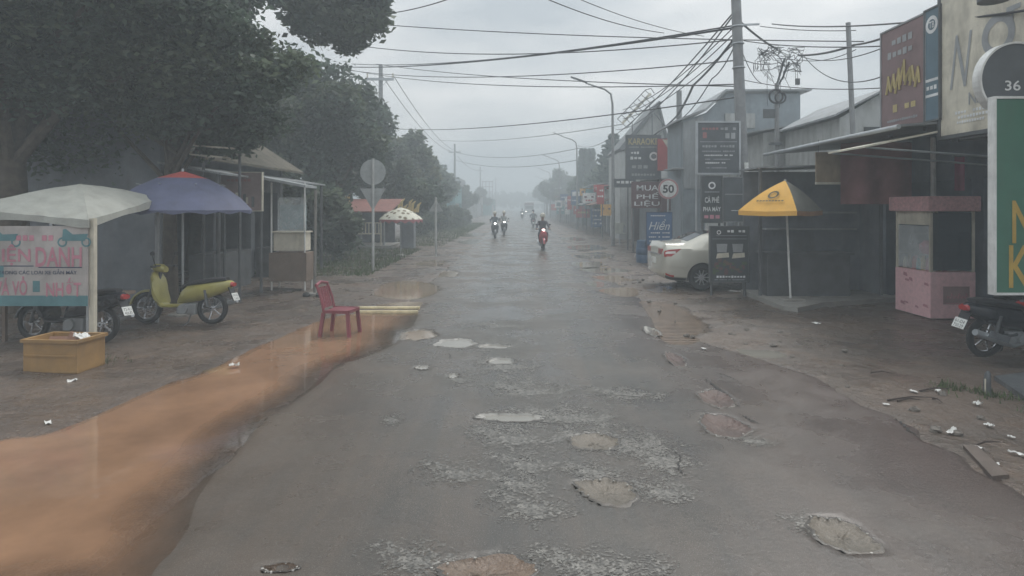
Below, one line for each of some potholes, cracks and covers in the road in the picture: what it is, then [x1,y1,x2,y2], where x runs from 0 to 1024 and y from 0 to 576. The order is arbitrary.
pothole [396,329,437,341]
pothole [664,352,687,367]
pothole [260,562,301,573]
pothole [472,412,547,423]
pothole [804,515,885,554]
pothole [571,476,639,508]
pothole [567,432,621,450]
pothole [430,551,543,576]
pothole [696,388,737,409]
pothole [431,338,480,348]
pothole [698,413,755,439]
